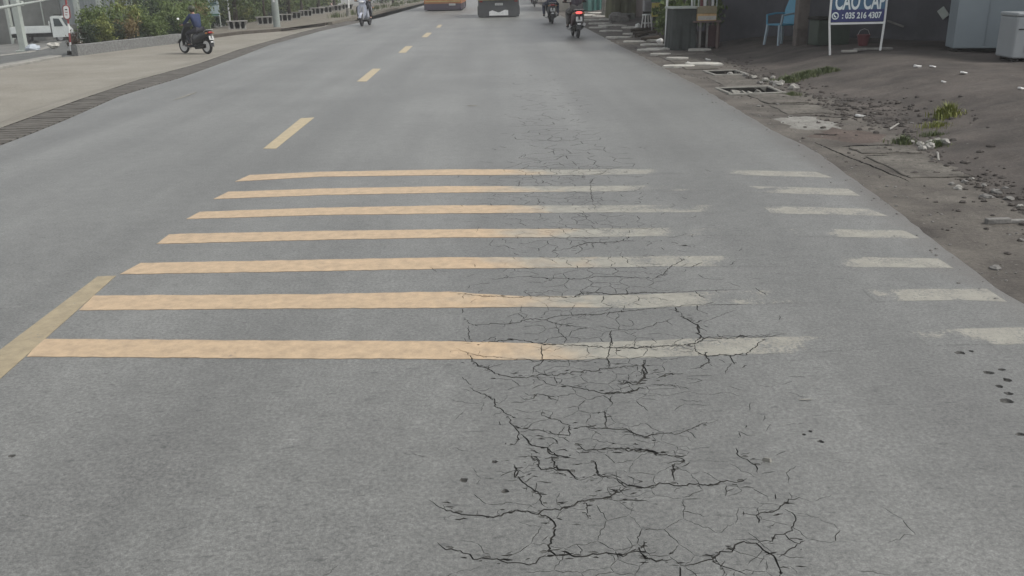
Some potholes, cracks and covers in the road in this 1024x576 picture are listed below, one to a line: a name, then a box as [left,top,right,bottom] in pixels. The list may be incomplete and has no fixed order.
crack [323,75,915,576]
